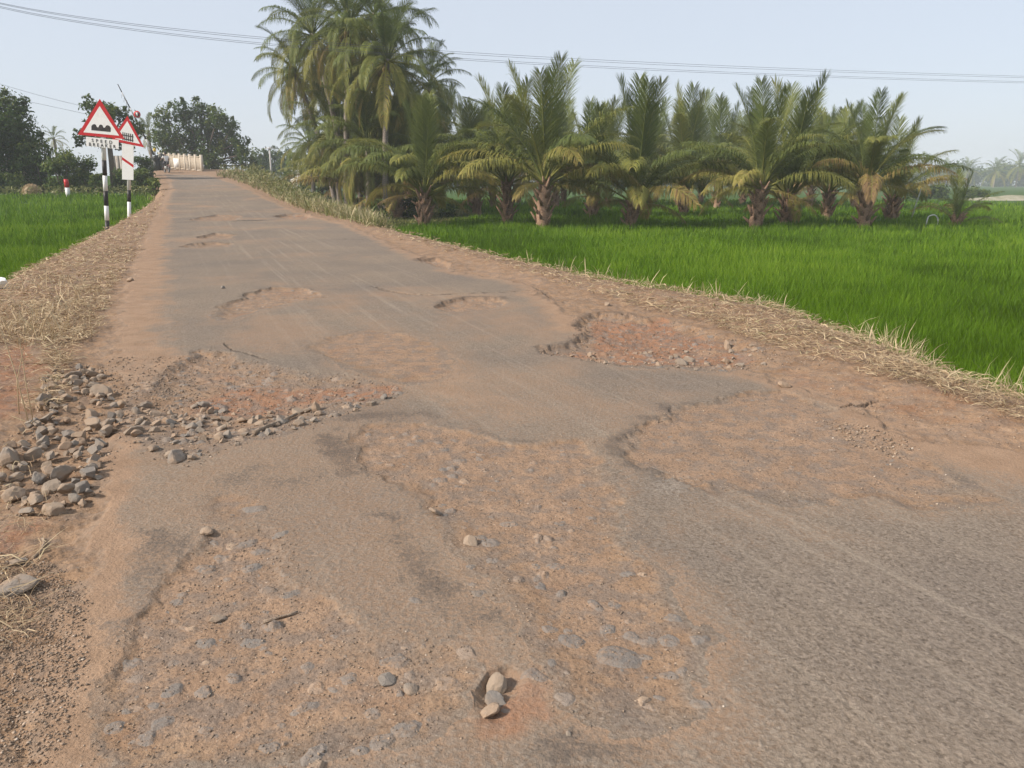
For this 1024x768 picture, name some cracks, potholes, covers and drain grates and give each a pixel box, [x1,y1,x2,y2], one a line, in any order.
pothole [345,420,727,741]
pothole [209,286,330,321]
pothole [533,311,779,375]
pothole [618,388,1016,515]
pothole [189,214,243,222]
crack [842,399,881,408]
pothole [118,348,411,465]
pothole [433,296,511,313]
